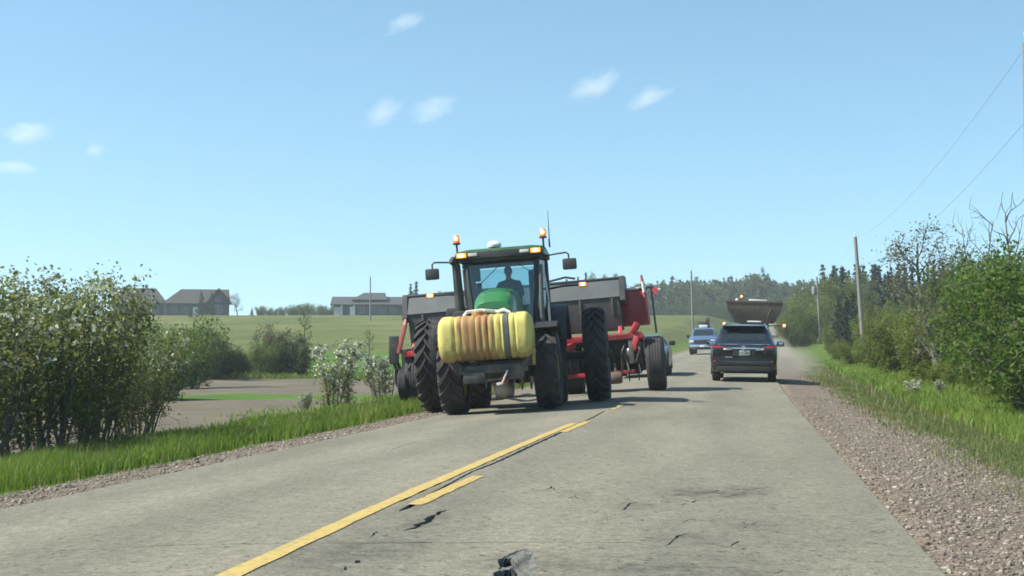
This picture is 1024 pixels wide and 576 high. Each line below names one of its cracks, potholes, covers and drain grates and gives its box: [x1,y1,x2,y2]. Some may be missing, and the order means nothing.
crack [666,487,762,546]
crack [595,521,756,568]
pothole [492,549,539,576]
